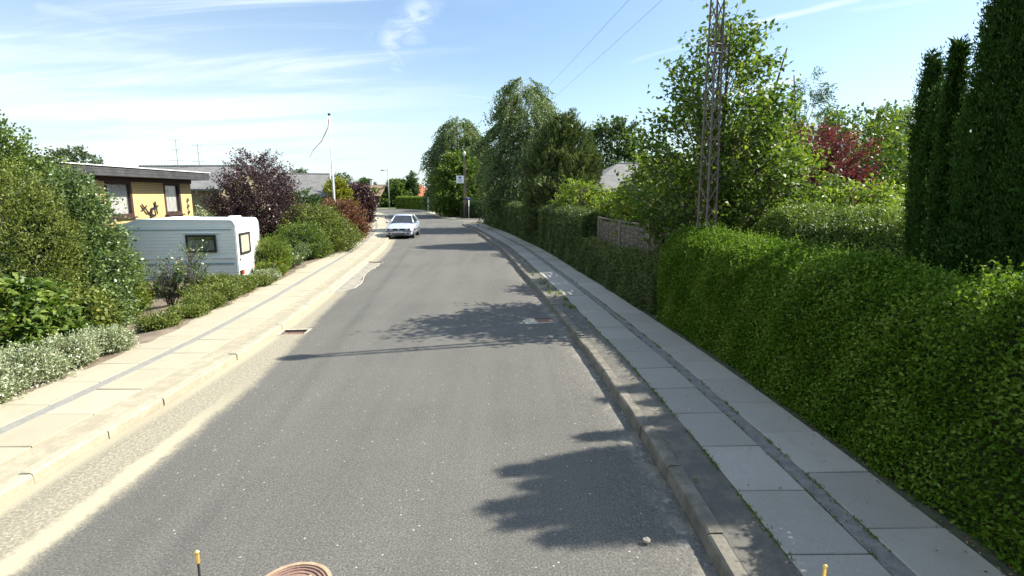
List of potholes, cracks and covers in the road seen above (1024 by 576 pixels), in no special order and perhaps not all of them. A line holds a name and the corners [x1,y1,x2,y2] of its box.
manhole cover [266,562,332,576]
